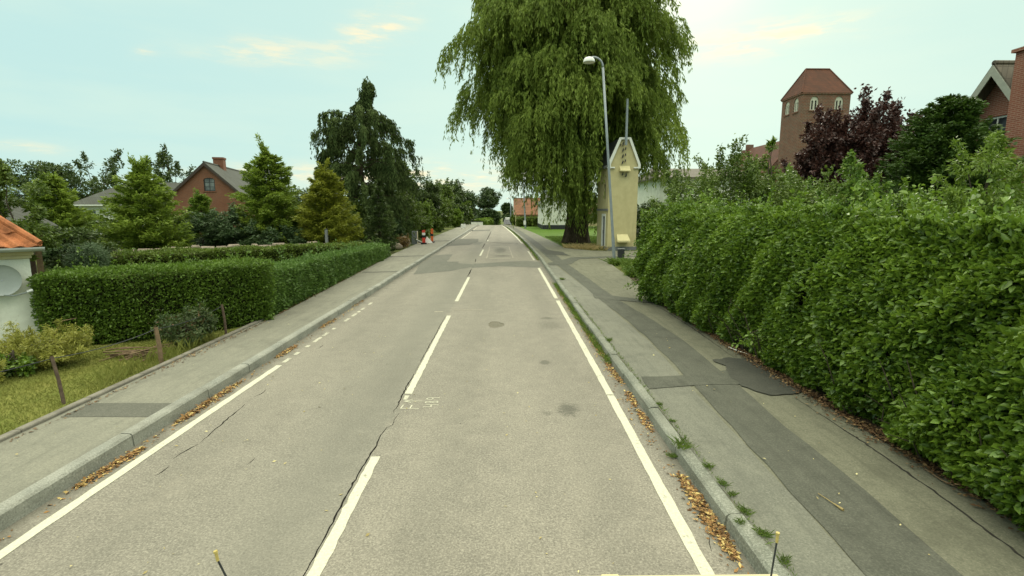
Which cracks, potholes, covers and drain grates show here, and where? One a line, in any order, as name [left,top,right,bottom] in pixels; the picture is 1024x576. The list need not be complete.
crack [303,321,443,576]
crack [157,391,265,475]
